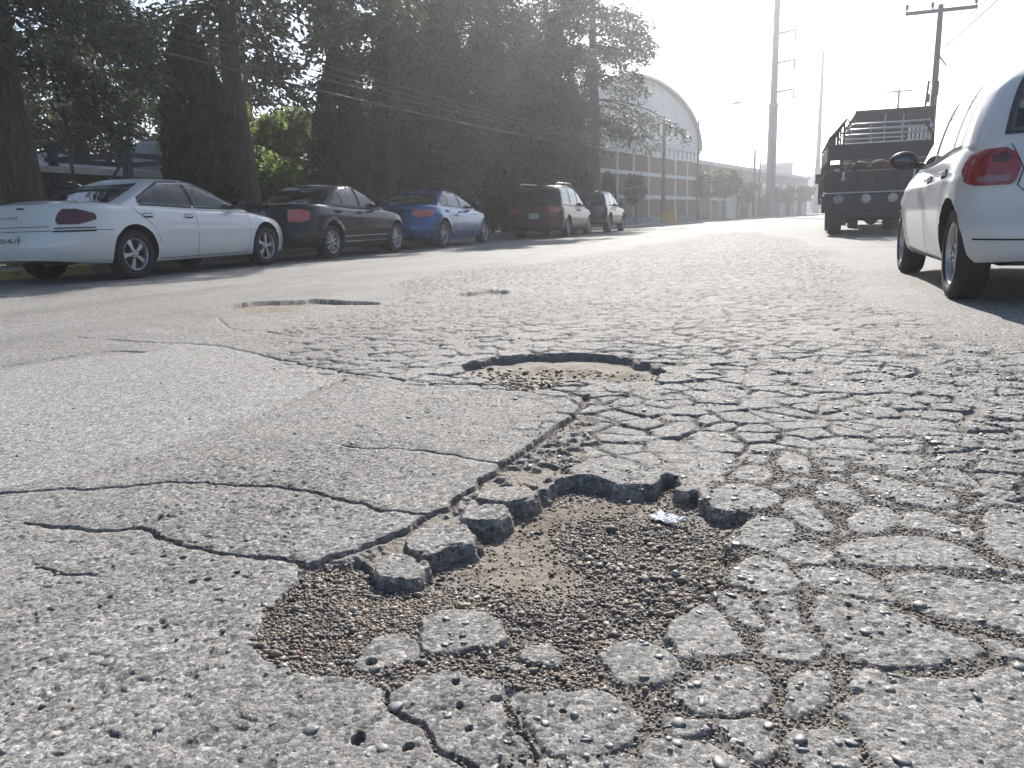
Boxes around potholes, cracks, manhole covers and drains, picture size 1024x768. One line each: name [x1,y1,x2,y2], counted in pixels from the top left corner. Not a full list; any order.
pothole [213,299,380,314]
crack [0,232,1024,768]
pothole [454,289,509,298]
pothole [461,352,667,391]
pothole [251,474,751,701]
